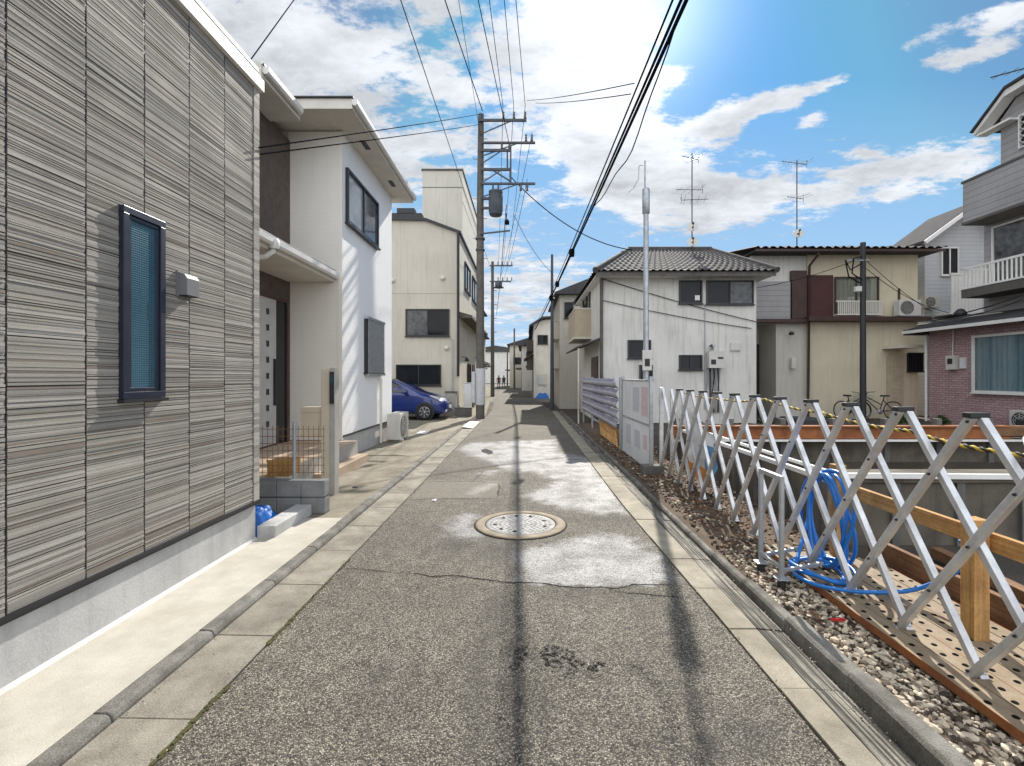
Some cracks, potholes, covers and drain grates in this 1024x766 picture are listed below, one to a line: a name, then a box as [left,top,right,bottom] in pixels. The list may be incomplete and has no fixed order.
manhole cover [474,511,567,540]
crack [341,568,695,598]
